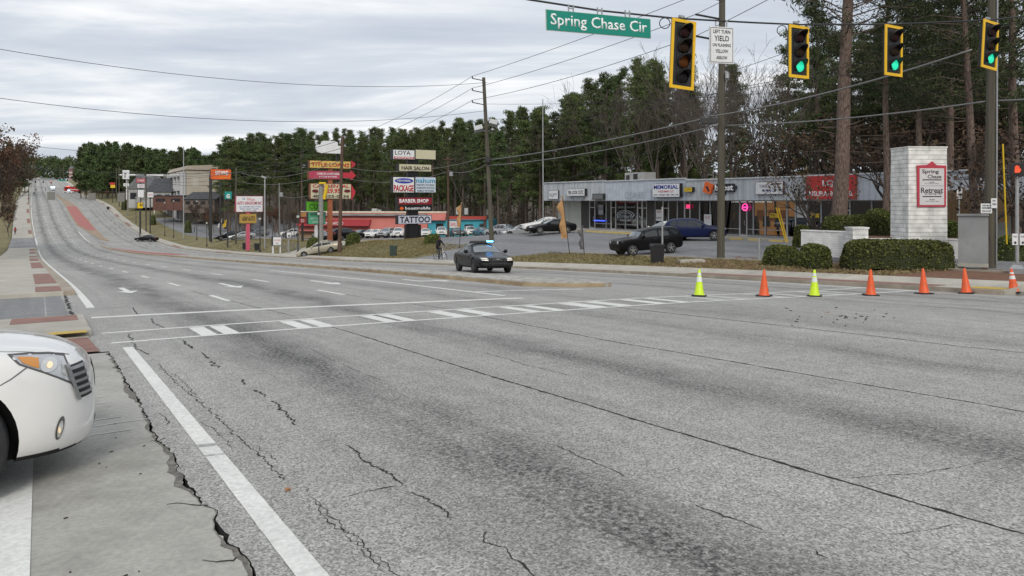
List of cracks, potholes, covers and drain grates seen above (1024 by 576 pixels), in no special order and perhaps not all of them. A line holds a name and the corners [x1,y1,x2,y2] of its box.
crack [338,445,535,576]
crack [108,333,256,576]
crack [158,363,400,576]
